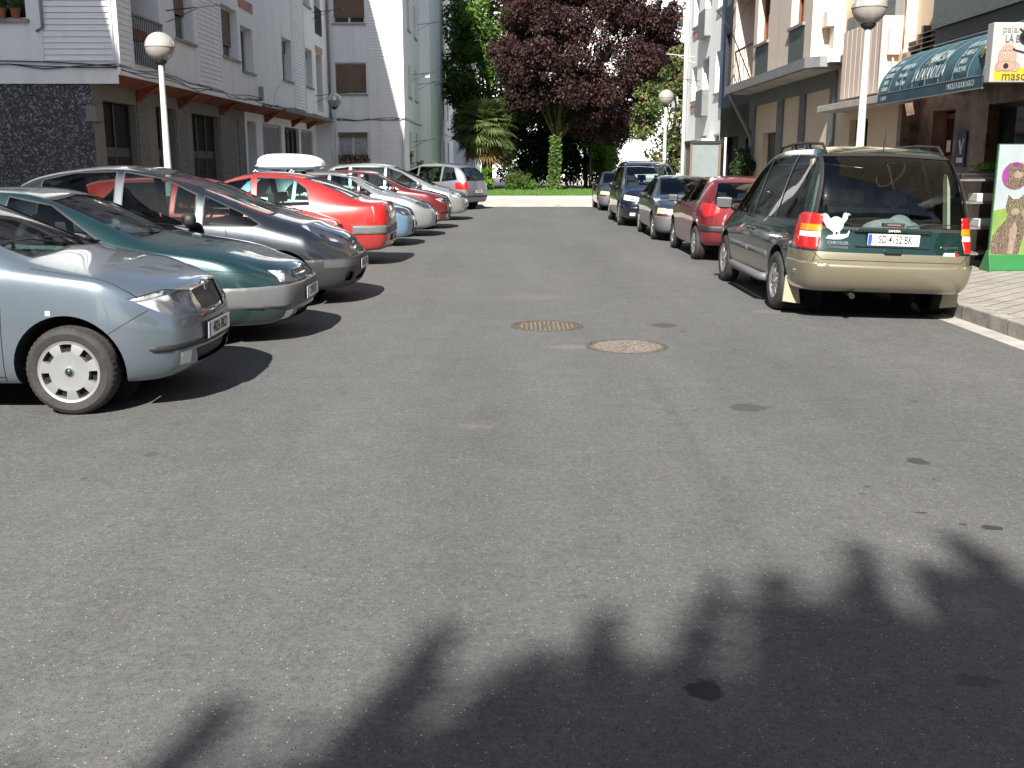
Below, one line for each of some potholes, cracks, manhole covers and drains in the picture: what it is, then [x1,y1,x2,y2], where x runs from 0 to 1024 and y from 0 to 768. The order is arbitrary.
manhole cover [585,339,669,354]
manhole cover [510,320,584,332]
